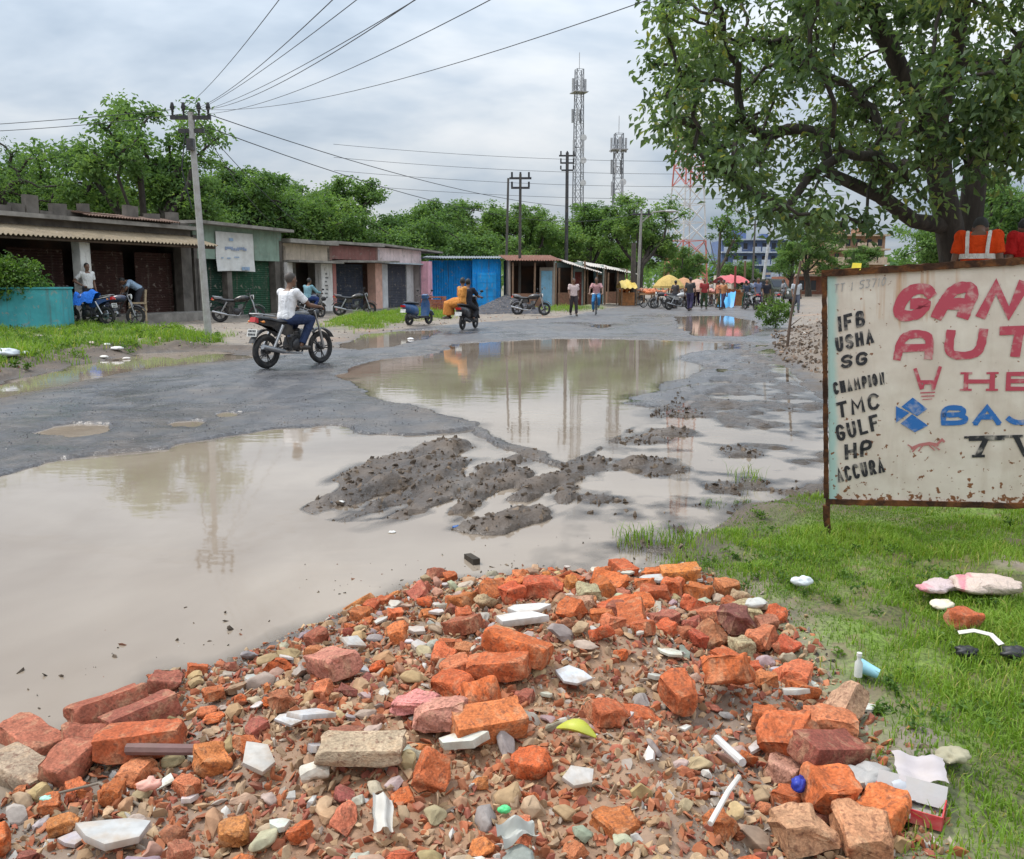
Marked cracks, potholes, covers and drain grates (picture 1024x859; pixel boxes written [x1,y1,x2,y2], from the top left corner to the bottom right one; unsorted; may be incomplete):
pothole [167,418,207,427]
pothole [334,337,726,469]
pothole [673,315,765,336]
pothole [336,328,442,350]
pothole [0,424,562,802]
pothole [34,421,110,437]
